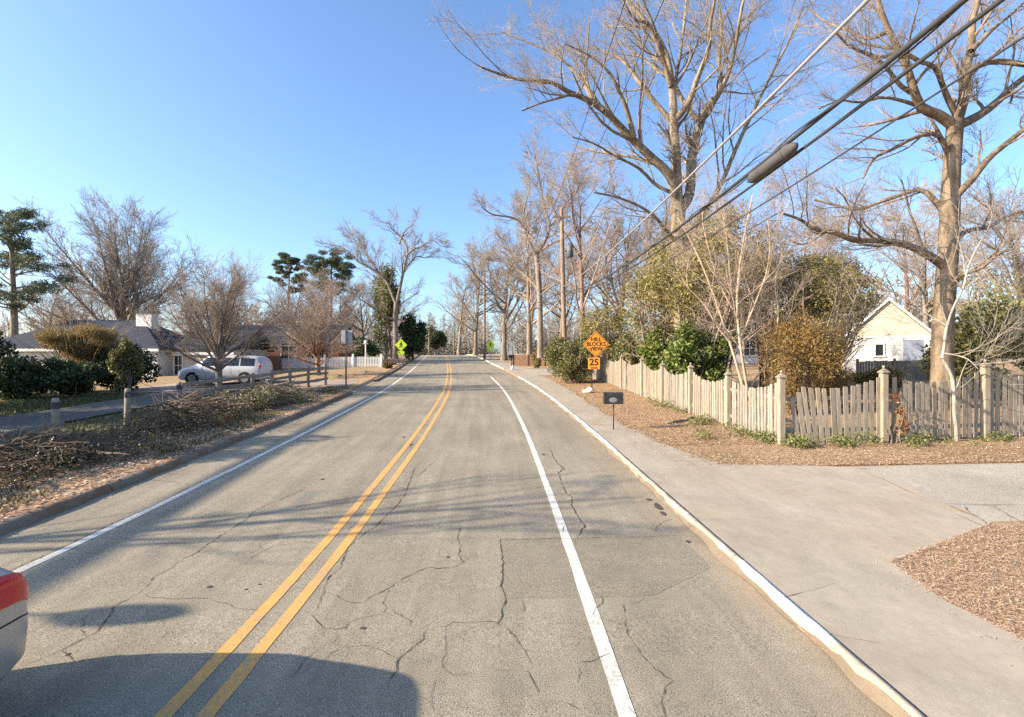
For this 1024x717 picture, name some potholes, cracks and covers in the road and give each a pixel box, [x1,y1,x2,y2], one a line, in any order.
crack [28,488,304,663]
crack [292,451,672,708]
